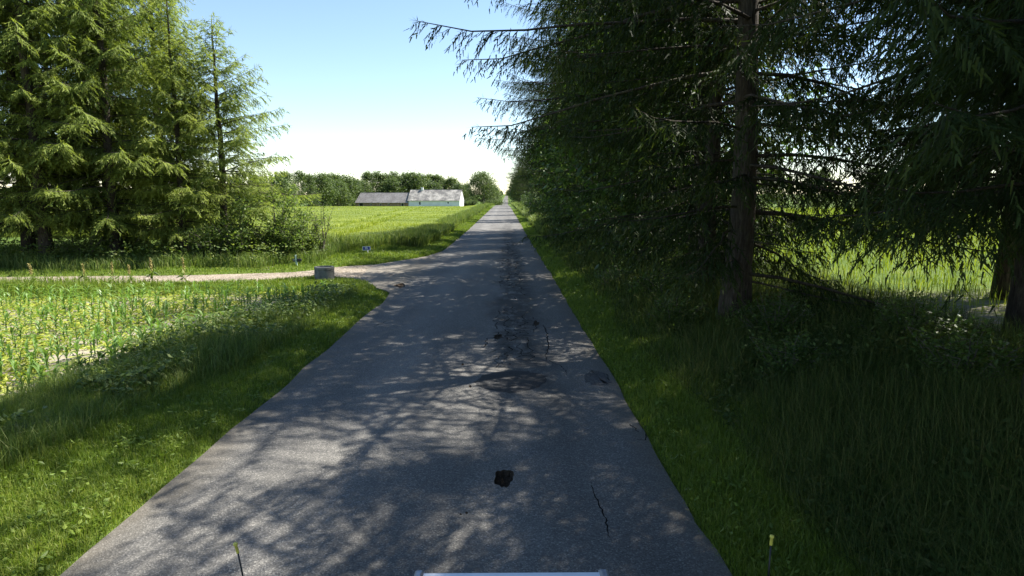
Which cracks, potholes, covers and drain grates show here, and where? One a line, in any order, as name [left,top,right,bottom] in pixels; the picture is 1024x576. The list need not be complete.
crack [591,486,613,543]
crack [484,307,567,375]
crack [499,242,526,299]
pothole [494,470,514,488]
